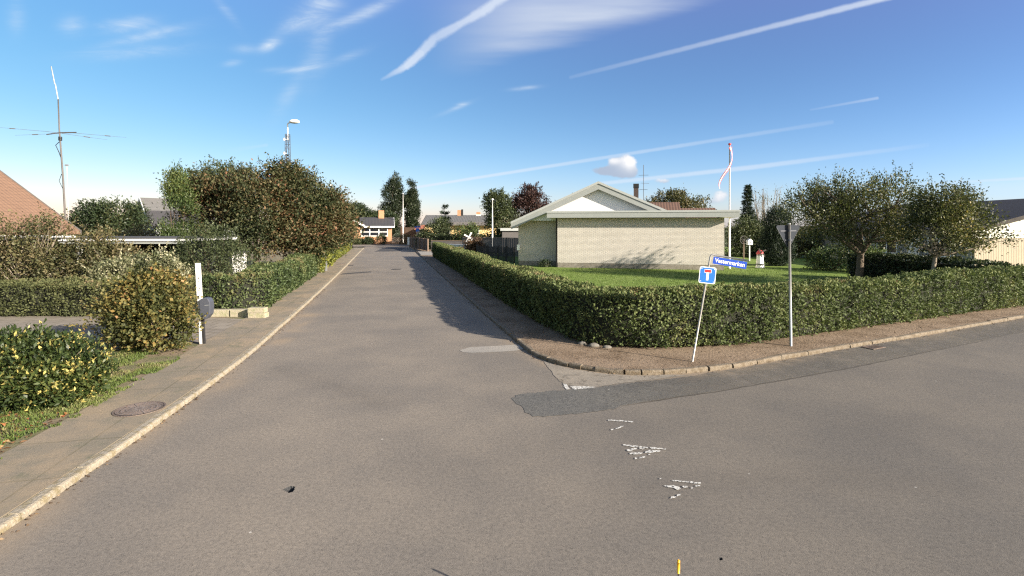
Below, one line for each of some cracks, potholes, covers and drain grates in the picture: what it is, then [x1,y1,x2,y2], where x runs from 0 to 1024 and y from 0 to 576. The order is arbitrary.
manhole cover [112,401,166,417]
